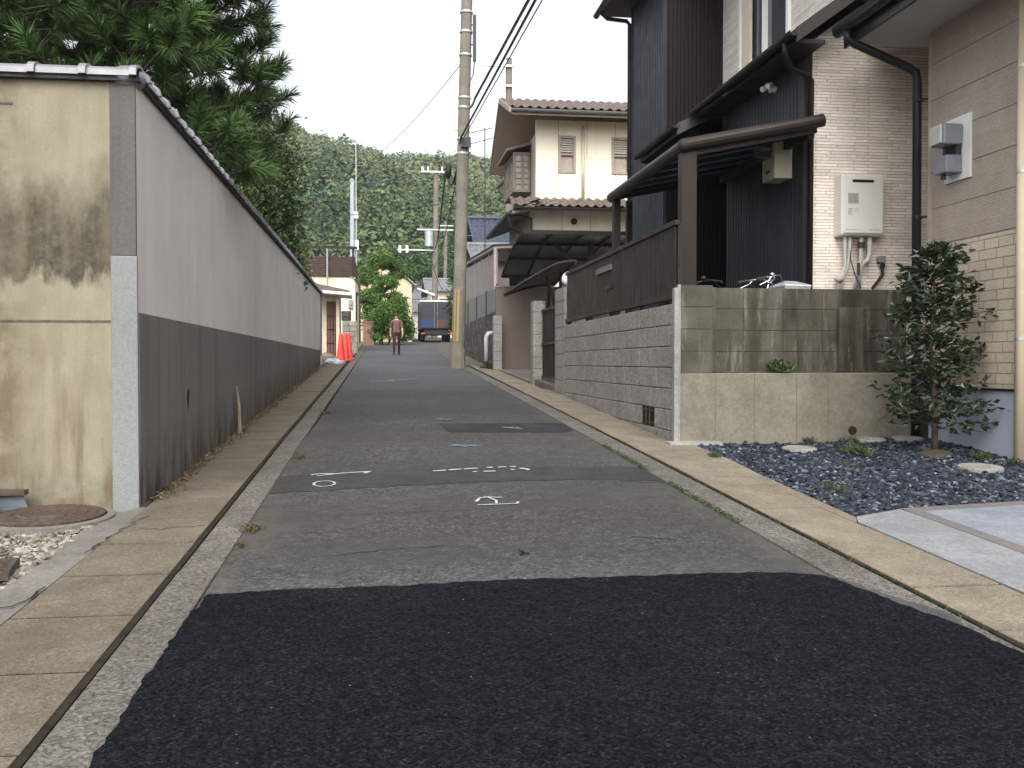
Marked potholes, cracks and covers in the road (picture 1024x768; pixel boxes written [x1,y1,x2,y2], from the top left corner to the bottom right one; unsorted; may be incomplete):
crack [85,516,206,553]
crack [315,545,464,557]
manhole cover [0,504,116,538]
